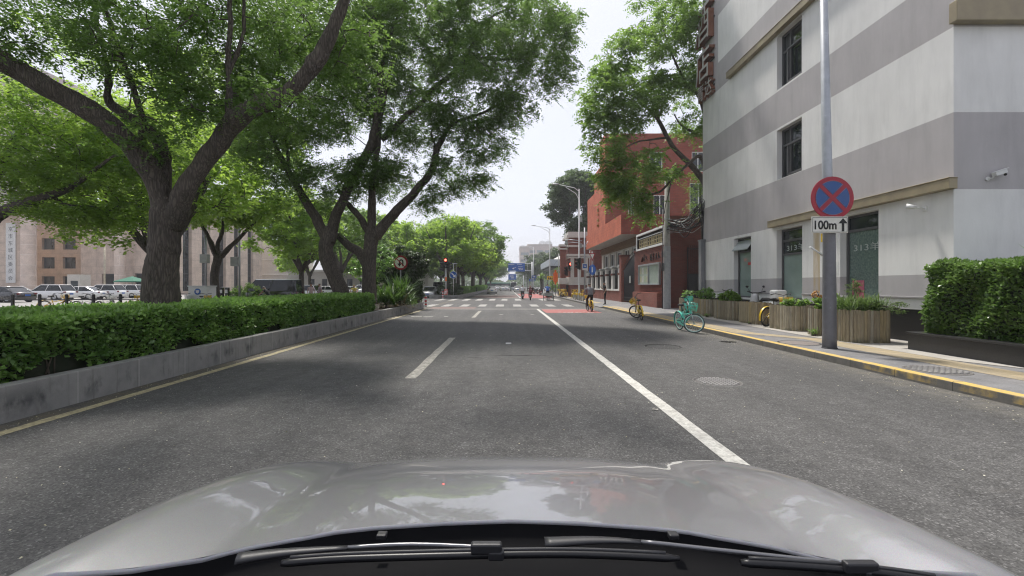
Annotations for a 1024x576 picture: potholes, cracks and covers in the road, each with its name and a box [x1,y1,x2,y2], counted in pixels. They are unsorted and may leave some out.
manhole cover [692,377,743,387]
